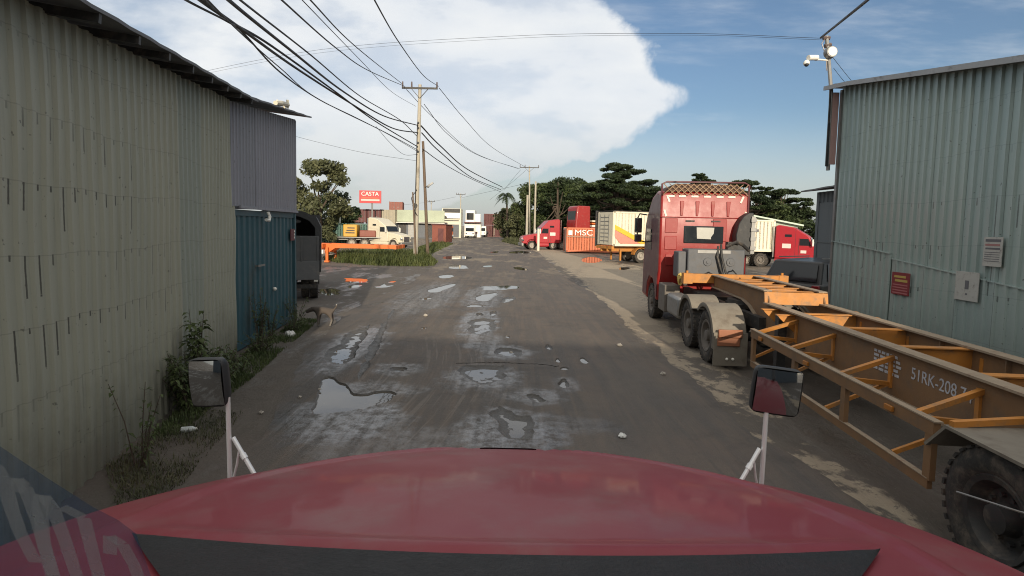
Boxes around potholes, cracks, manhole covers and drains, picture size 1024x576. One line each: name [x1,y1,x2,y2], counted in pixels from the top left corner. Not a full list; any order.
pothole [467,318,497,334]
pothole [494,348,522,356]
pothole [475,292,498,301]
pothole [427,283,456,292]
pothole [489,406,535,439]
pothole [311,376,396,414]
pothole [324,325,370,364]
pothole [457,365,507,385]
